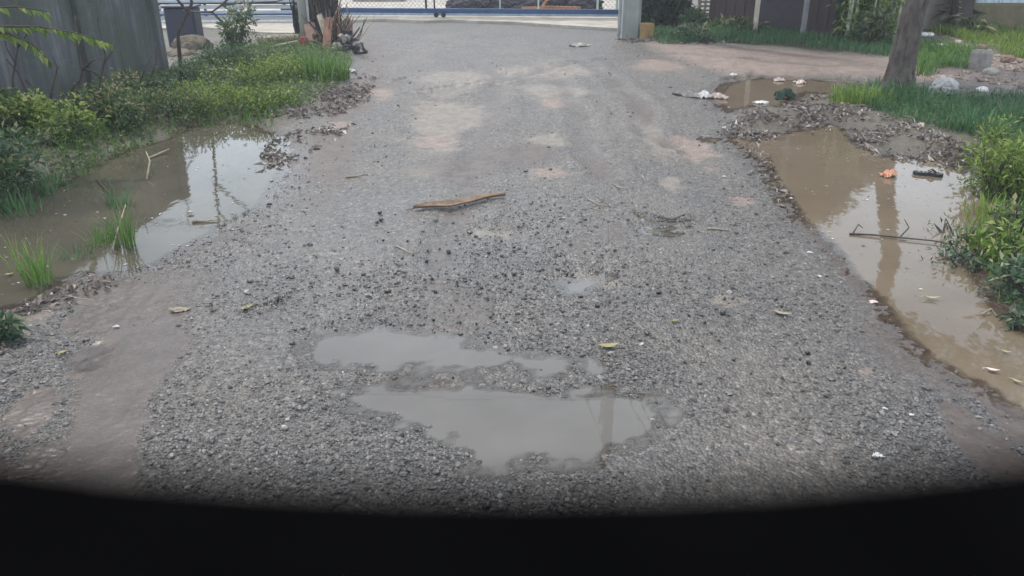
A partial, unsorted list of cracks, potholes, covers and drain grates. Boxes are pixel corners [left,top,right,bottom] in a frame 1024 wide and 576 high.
pothole [297,325,621,400]
pothole [552,271,621,296]
pothole [328,360,681,479]
